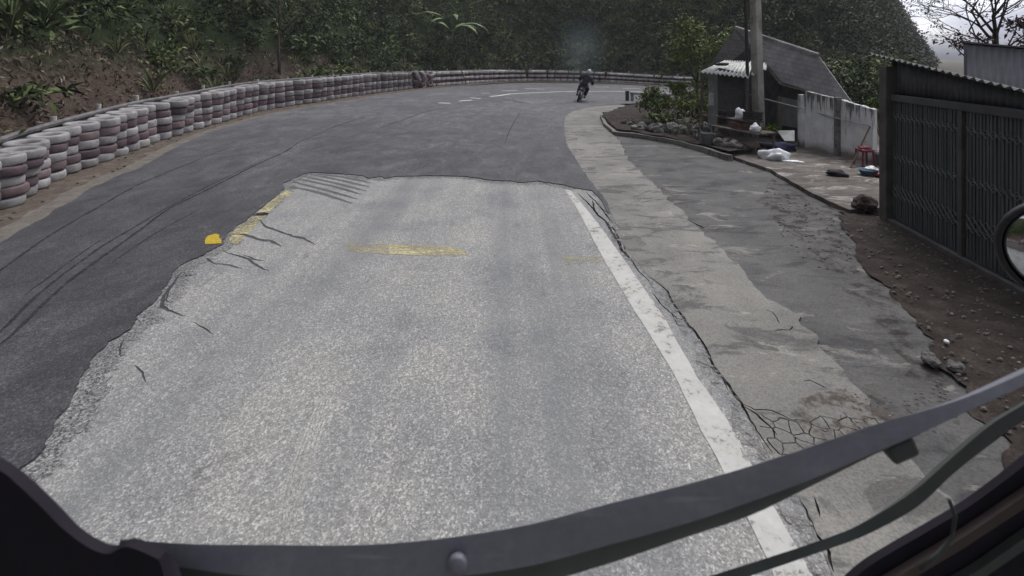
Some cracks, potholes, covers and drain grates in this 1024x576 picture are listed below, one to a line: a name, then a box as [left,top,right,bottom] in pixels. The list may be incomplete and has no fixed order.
crack [800,498,834,572]
crack [578,192,872,460]
crack [119,339,146,382]
crack [206,221,315,271]
crack [160,275,212,334]
